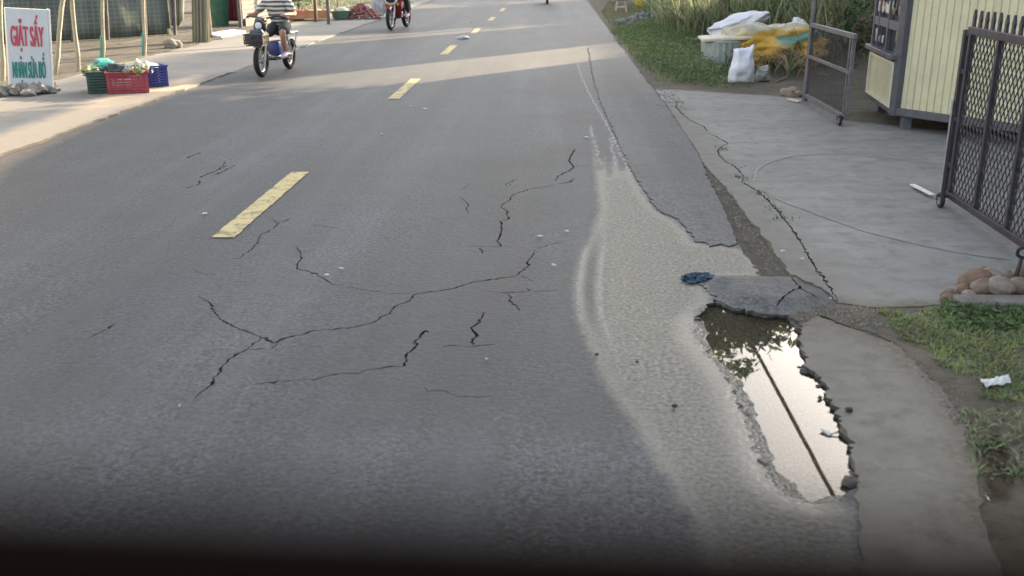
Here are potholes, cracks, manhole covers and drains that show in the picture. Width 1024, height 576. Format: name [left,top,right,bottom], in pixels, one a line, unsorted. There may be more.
crack [237,219,288,259]
pothole [693,300,860,504]
crack [186,153,234,189]
crack [660,94,838,306]
crack [479,150,587,253]
crack [194,242,559,399]
